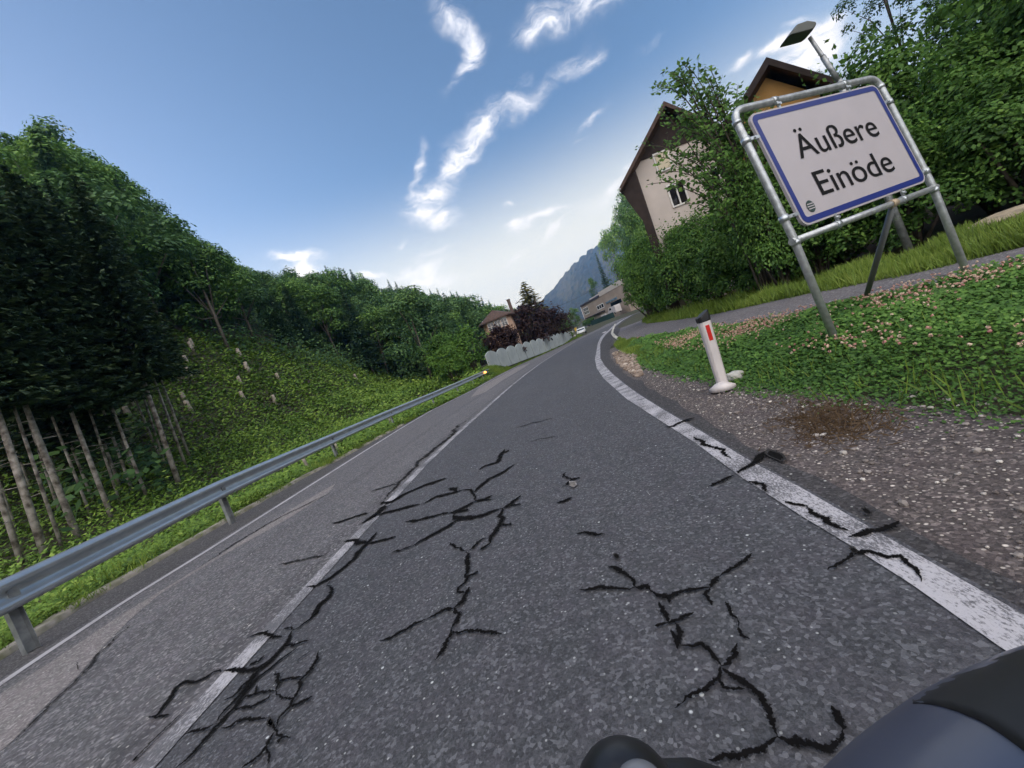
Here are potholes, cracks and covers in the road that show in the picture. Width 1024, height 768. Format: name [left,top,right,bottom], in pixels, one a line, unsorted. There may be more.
crack [668,418,767,491]
crack [579,553,847,762]
crack [785,501,922,581]
crack [148,449,521,768]
